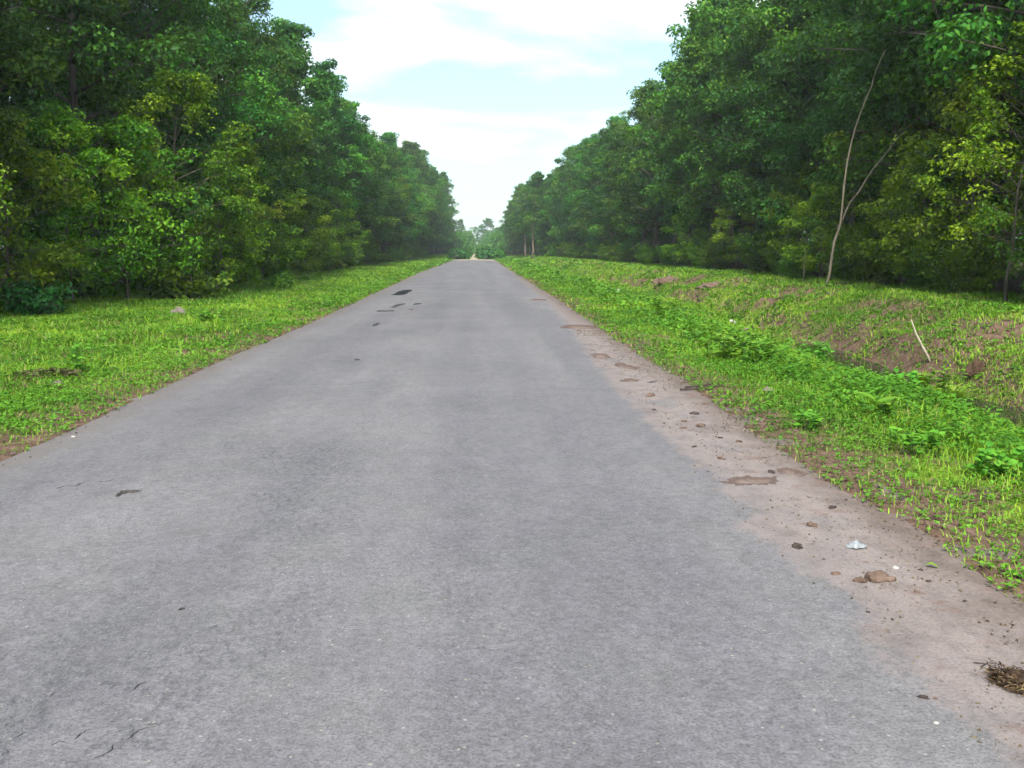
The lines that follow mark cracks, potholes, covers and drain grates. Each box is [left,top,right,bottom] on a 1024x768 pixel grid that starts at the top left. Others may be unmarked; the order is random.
crack [51,722,162,763]
